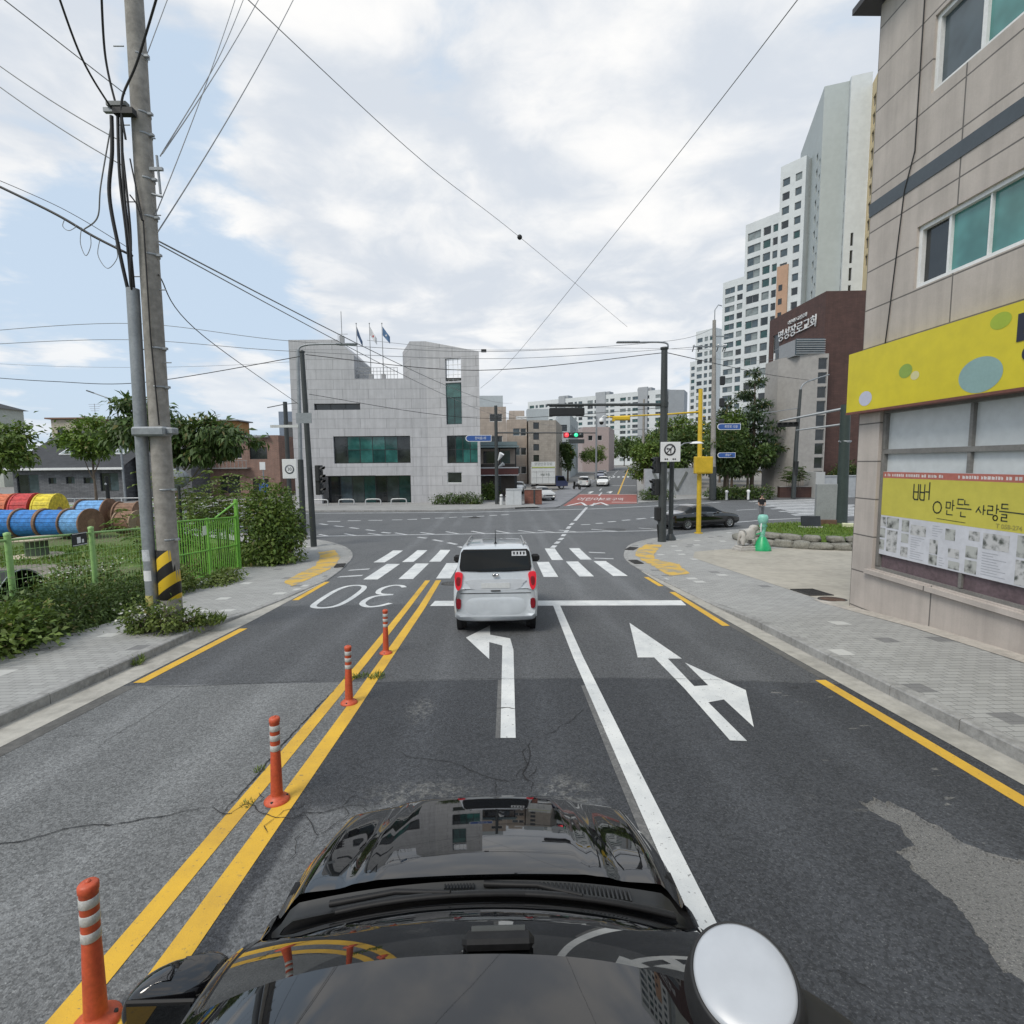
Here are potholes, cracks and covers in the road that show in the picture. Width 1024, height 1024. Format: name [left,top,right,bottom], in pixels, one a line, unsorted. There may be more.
crack [0,692,400,865]
drain grate [790,588,834,596]
crack [400,708,584,792]
